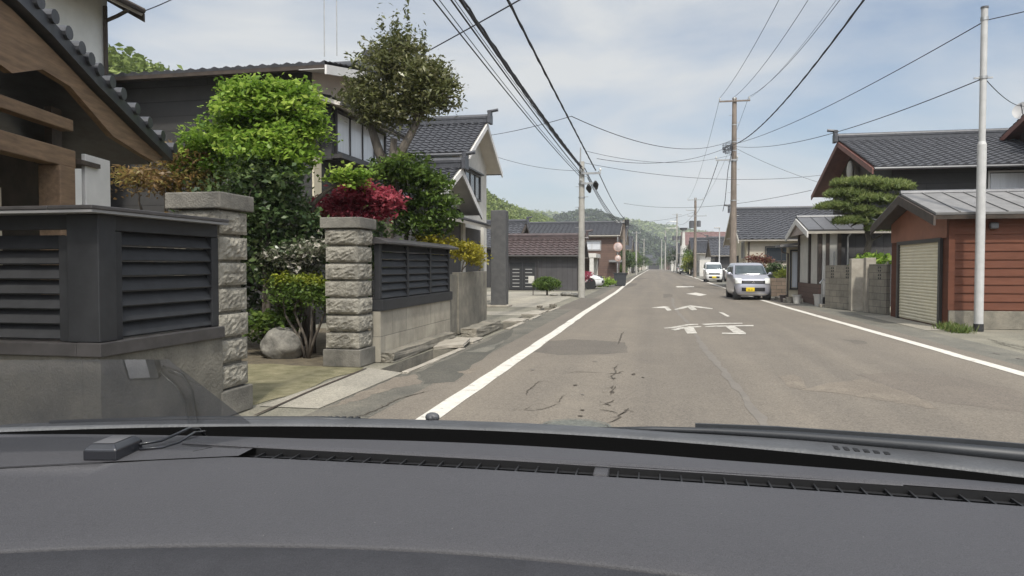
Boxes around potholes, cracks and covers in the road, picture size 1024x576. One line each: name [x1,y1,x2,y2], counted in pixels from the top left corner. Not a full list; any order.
crack [577,365,635,423]
